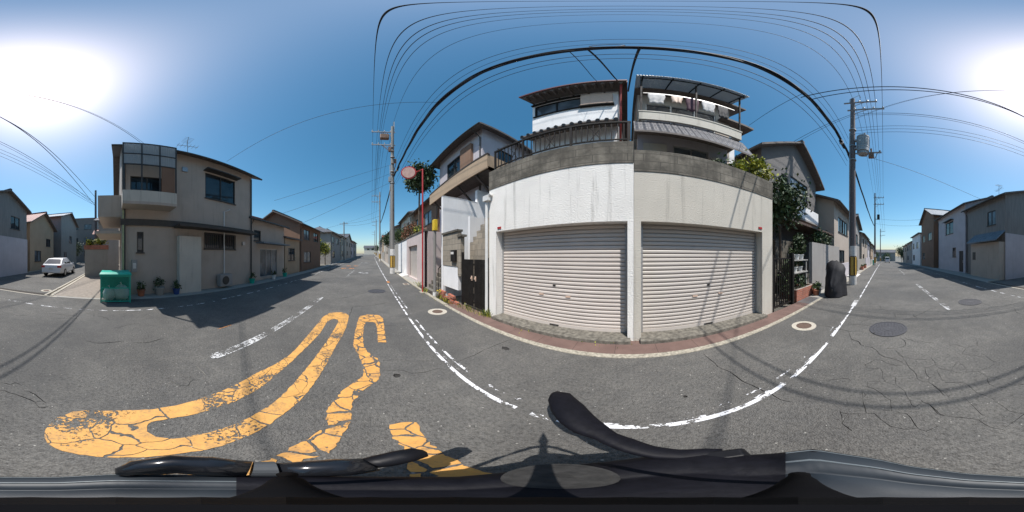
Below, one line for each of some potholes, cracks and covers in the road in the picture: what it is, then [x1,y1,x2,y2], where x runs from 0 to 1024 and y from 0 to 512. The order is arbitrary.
manhole cover [869,322,907,337]
crack [2,382,48,408]
manhole cover [792,321,816,331]
crack [818,307,1024,431]
